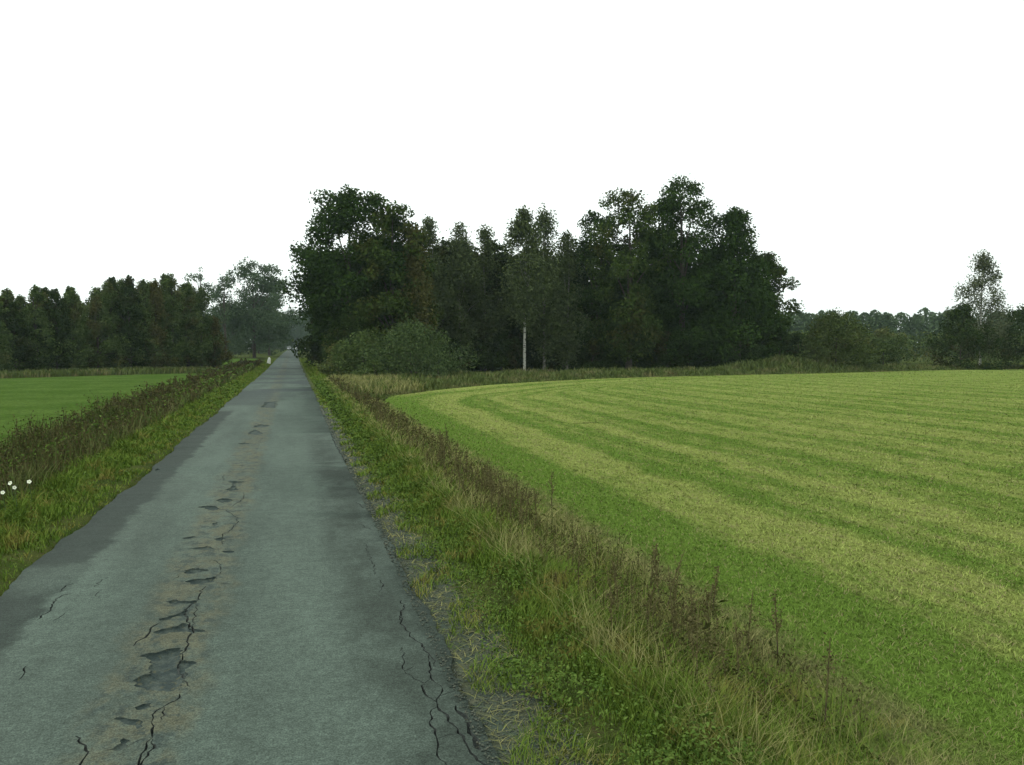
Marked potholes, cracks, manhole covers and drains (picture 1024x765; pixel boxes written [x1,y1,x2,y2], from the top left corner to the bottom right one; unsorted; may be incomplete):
pothole [153,623,205,634]
crack [130,496,244,765]
crack [37,583,73,620]
pothole [133,648,197,692]
crack [76,736,89,765]
pothole [185,577,217,585]
pothole [114,717,143,729]
crack [363,525,487,765]
pothole [104,738,130,751]
